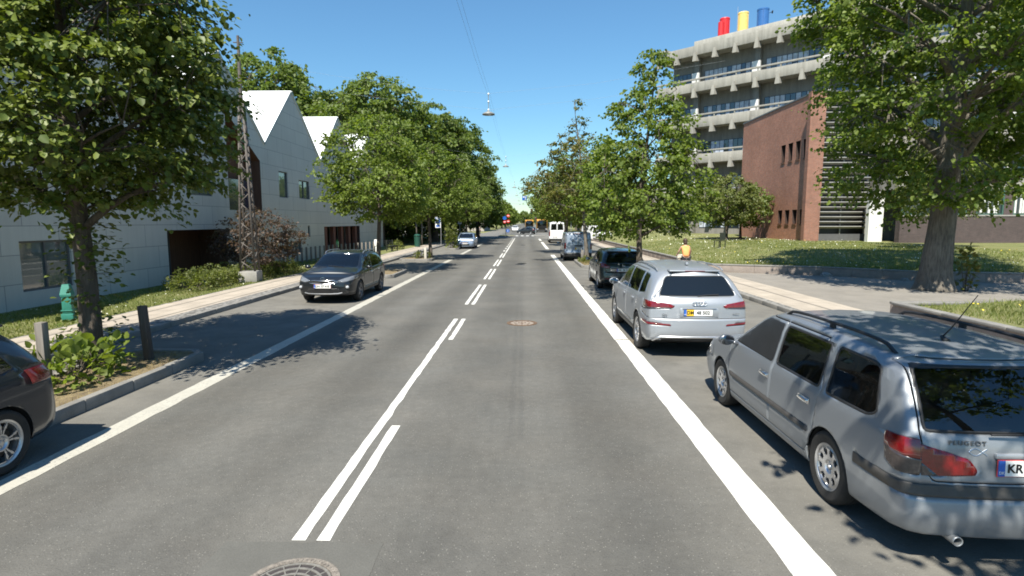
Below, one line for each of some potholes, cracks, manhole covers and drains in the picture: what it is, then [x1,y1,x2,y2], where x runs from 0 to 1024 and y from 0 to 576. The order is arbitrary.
manhole cover [251,558,340,576]
